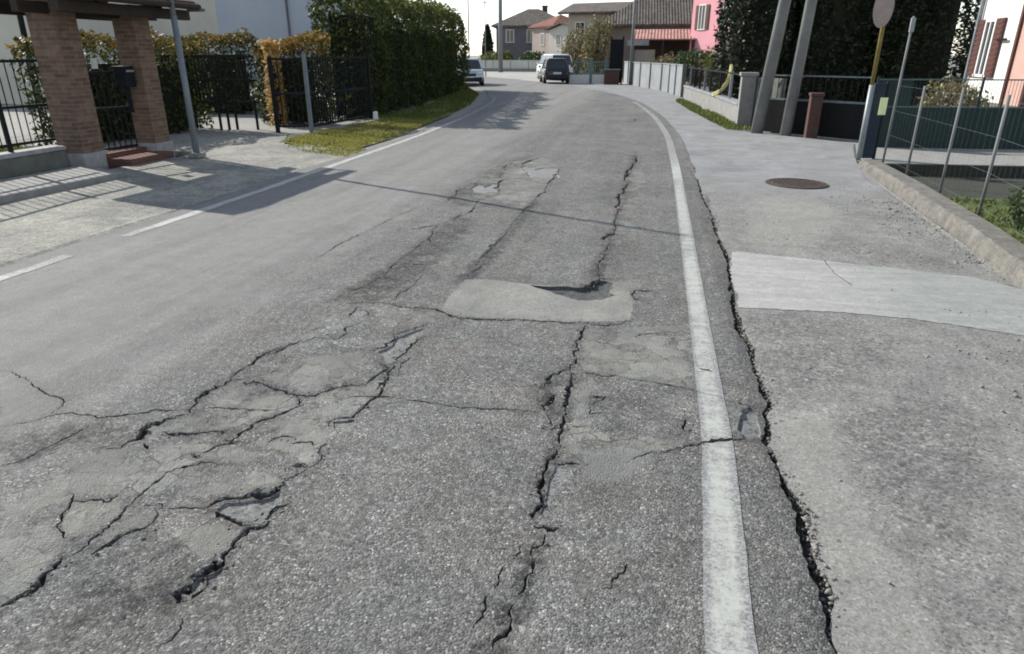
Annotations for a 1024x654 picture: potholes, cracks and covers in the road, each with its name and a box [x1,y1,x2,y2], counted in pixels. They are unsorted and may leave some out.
manhole cover [765,178,828,189]
pothole [531,281,614,301]
crack [584,141,639,290]
crack [0,181,833,648]
